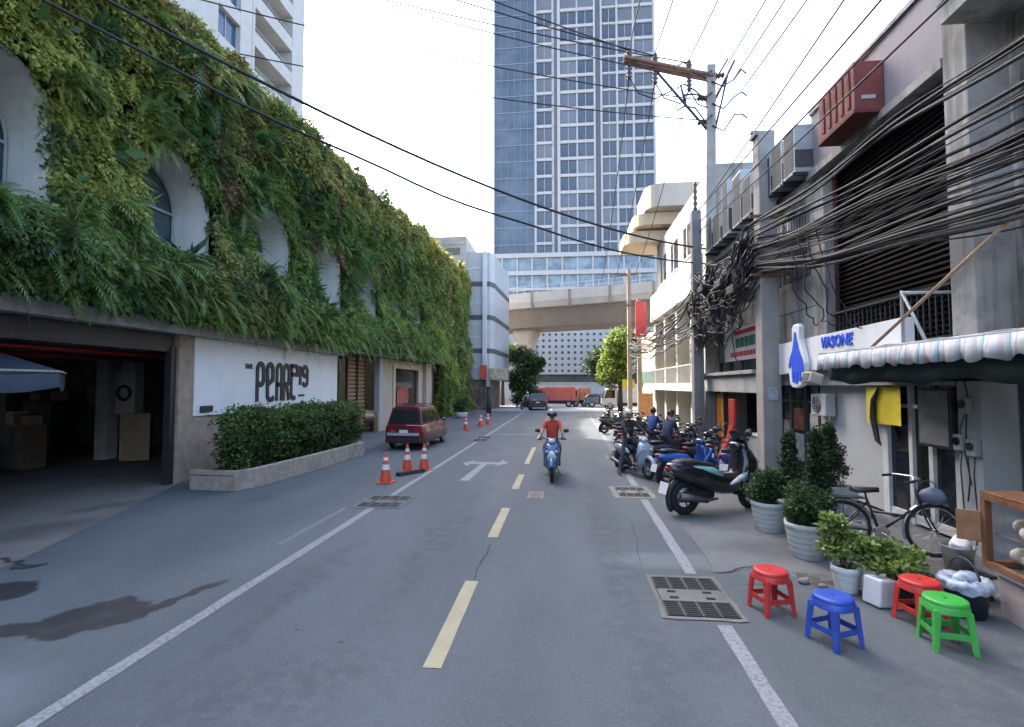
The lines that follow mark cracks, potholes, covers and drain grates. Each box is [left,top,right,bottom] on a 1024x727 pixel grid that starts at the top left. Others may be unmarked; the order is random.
drain grate [609,486,657,498]
drain grate [646,575,750,622]
crack [689,538,753,586]
drain grate [350,495,417,508]
manhole cover [527,491,544,499]
